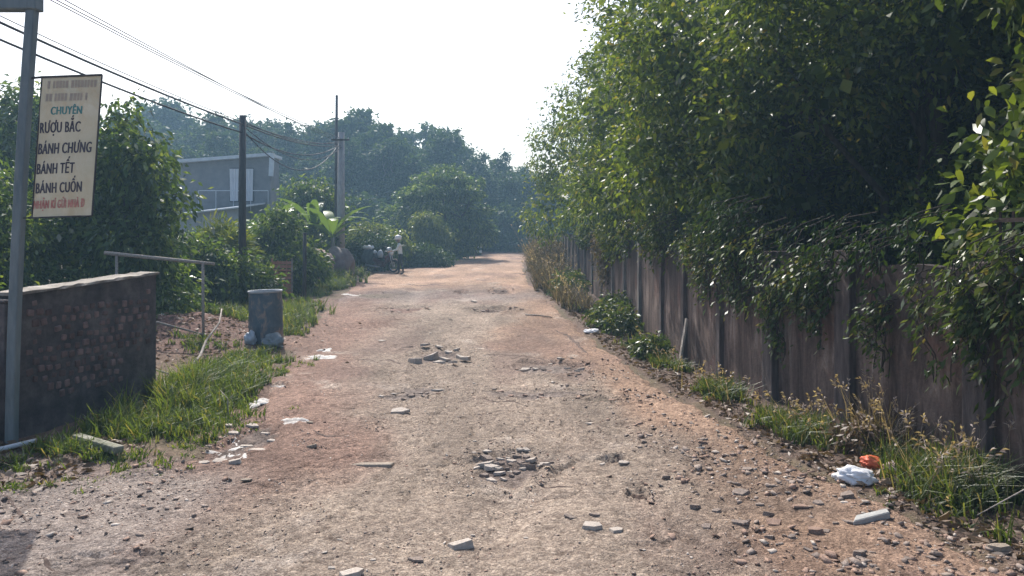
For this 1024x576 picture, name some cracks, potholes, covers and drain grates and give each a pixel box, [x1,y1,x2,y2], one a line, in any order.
pothole [465,447,555,490]
pothole [406,348,468,365]
pothole [510,363,588,374]
pothole [626,490,651,499]
